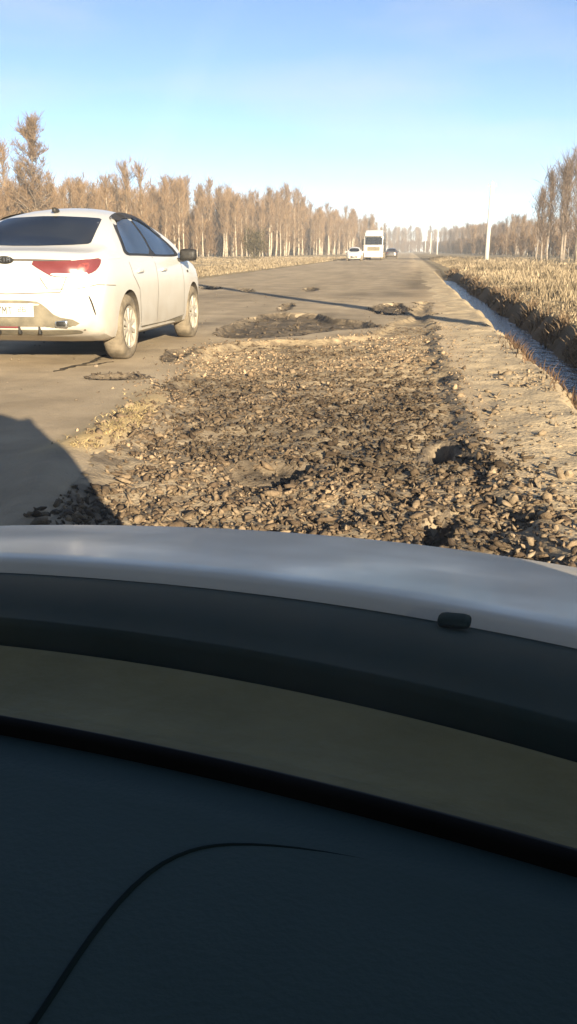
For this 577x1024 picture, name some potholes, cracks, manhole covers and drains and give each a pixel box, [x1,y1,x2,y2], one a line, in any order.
pothole [49,301,577,567]
